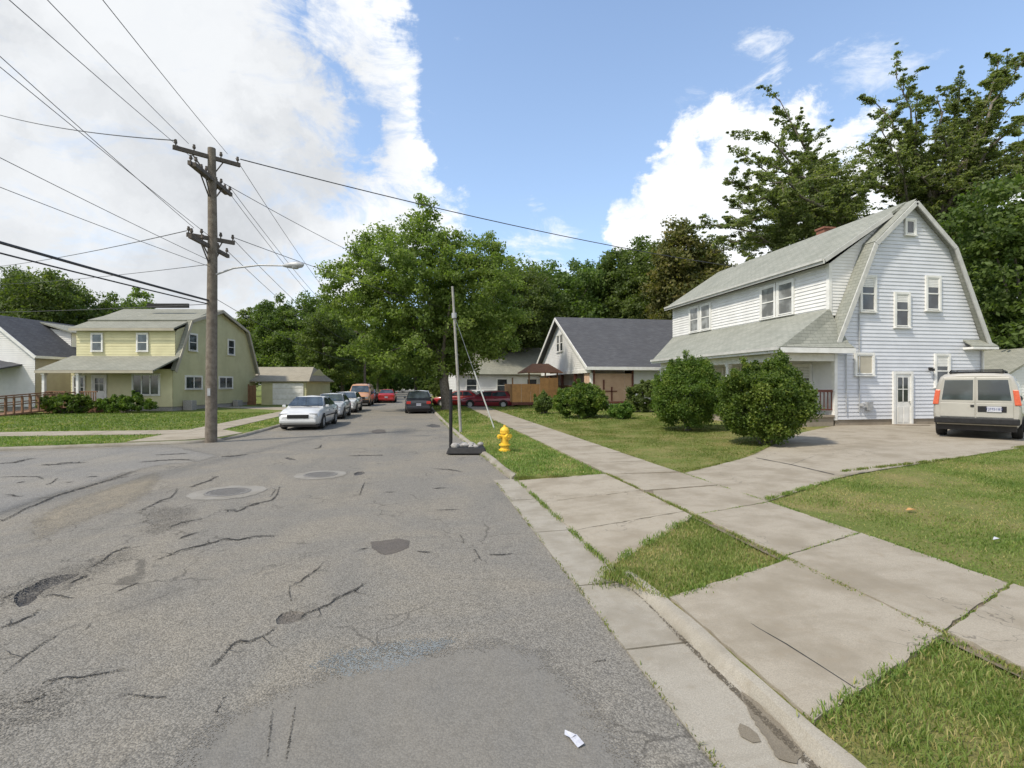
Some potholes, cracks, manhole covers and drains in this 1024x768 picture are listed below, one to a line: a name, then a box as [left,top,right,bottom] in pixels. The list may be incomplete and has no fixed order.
pothole [276,611,304,624]
crack [751,623,855,688]
manhole cover [186,485,267,500]
crack [223,487,296,512]
crack [266,704,296,758]
crack [140,453,219,522]
crack [2,458,98,497]
crack [276,563,367,620]
crack [0,518,267,674]
crack [14,666,126,703]
pothole [13,573,81,607]
